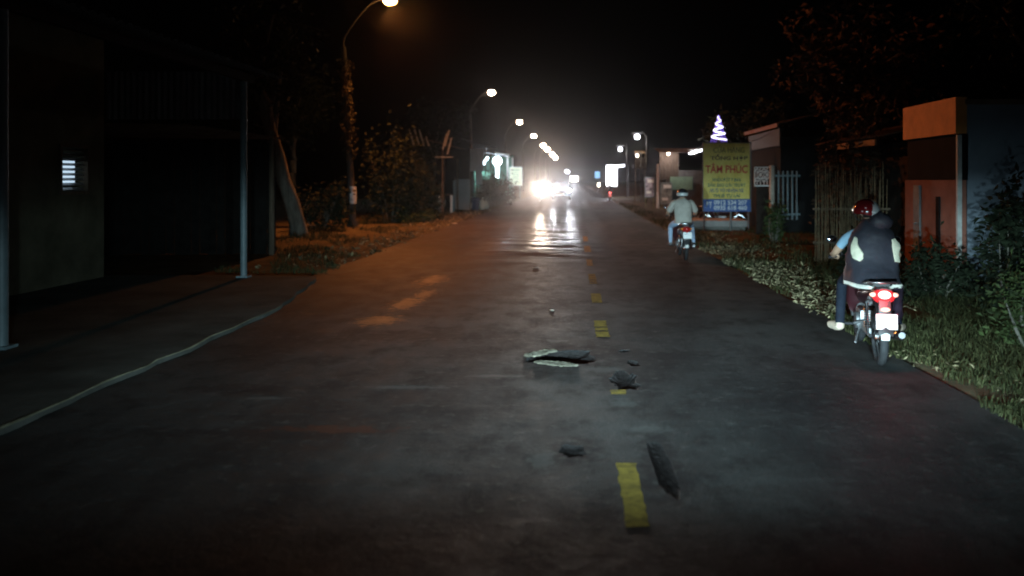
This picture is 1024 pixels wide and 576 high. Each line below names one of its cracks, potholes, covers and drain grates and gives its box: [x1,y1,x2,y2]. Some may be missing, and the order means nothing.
pothole [609,370,641,390]
pothole [523,349,597,367]
pothole [647,441,682,501]
pothole [558,444,588,458]
